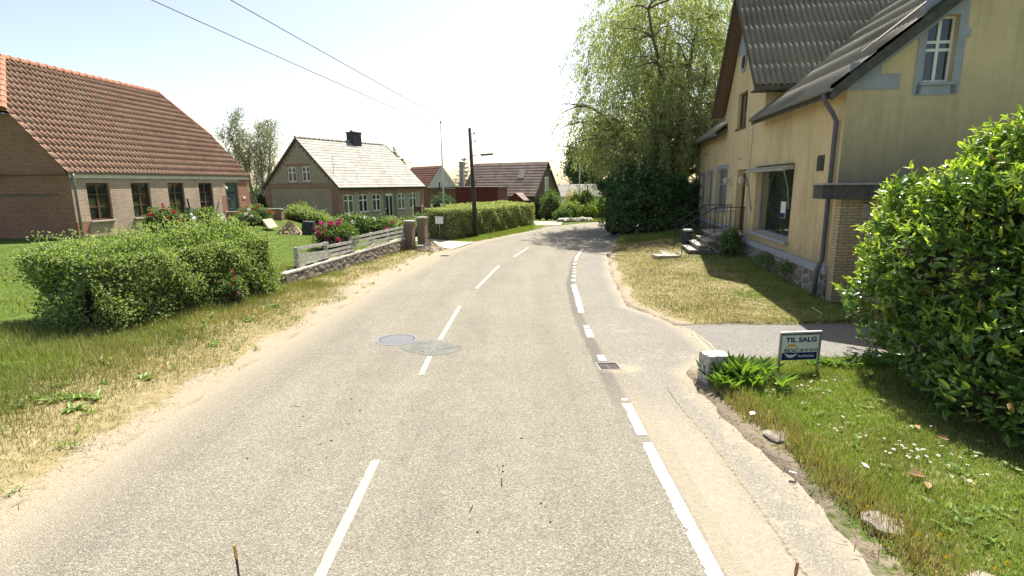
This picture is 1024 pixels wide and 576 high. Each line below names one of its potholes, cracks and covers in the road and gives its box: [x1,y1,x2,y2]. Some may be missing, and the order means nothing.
drain grate [595,362,623,370]
manhole cover [376,334,418,346]
